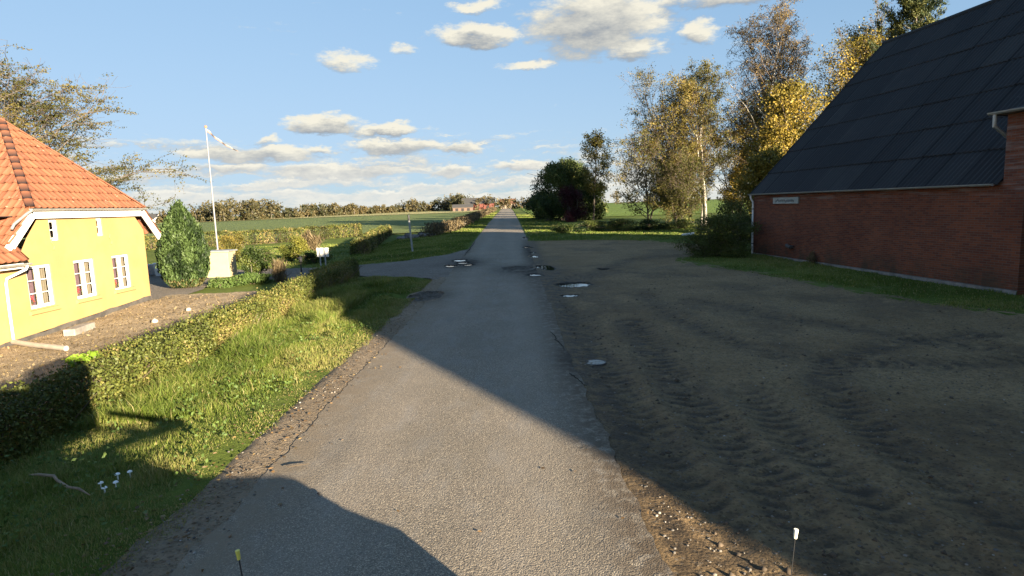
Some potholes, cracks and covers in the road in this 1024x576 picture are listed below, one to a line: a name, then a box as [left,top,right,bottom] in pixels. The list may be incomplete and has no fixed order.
pothole [533,264,558,272]
pothole [406,290,446,302]
